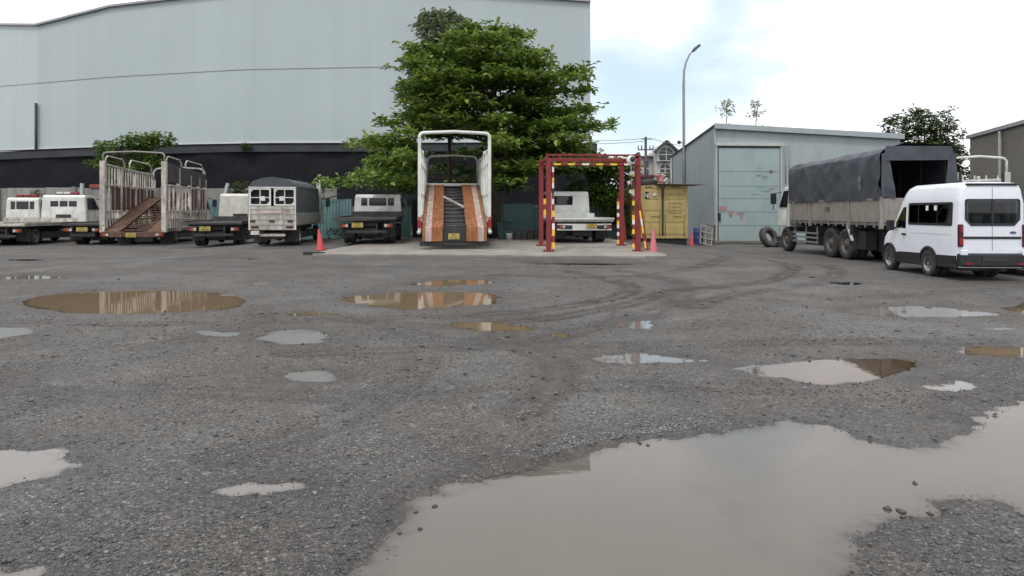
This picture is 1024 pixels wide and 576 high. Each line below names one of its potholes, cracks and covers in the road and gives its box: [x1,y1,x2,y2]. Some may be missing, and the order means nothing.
pothole [337,289,507,310]
pothole [725,356,922,385]
pothole [247,328,332,345]
pothole [947,345,1024,358]
pothole [203,478,328,498]
pothole [447,321,538,332]
pothole [0,443,101,488]
pothole [332,399,1024,576]
pothole [589,350,717,365]
pothole [830,304,1007,318]
pothole [12,287,251,315]
